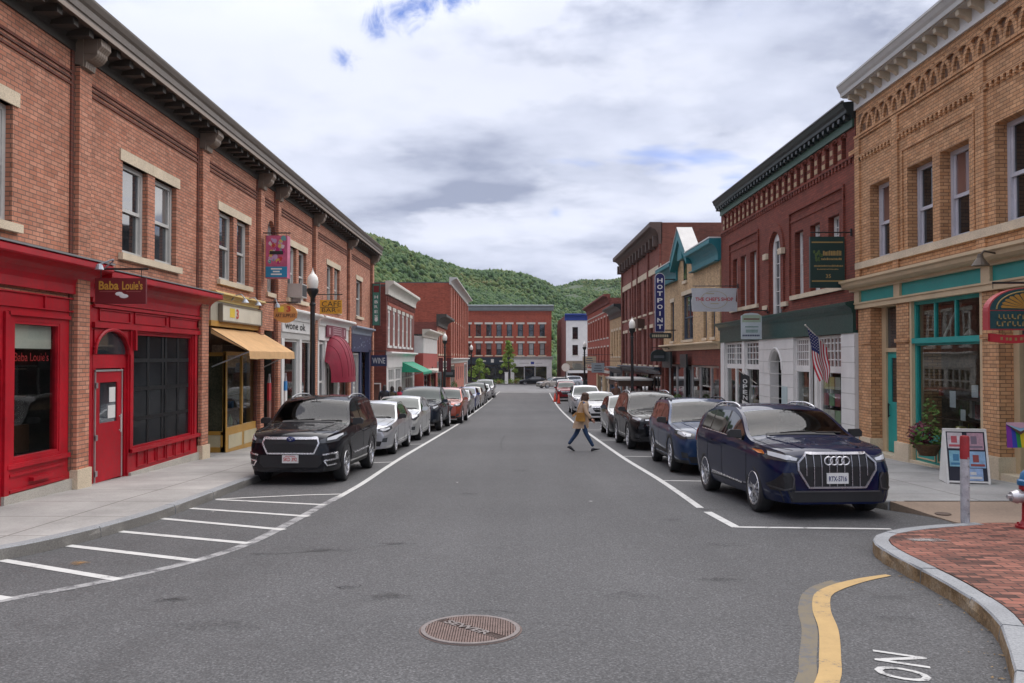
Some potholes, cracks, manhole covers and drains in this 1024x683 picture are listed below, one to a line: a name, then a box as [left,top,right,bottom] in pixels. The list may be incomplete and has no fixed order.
manhole cover [419,615,522,645]
